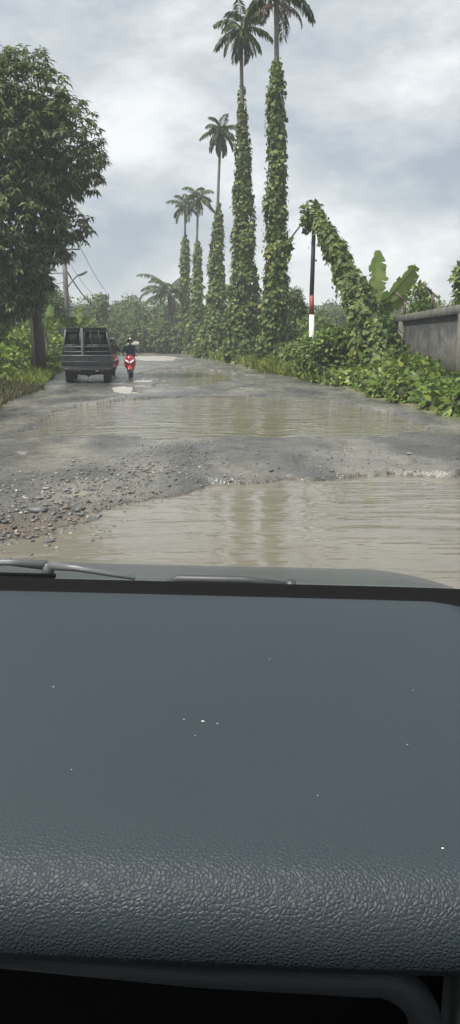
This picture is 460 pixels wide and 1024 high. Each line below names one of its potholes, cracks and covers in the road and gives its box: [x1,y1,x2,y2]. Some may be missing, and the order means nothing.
pothole [0,467,460,589]
pothole [106,384,146,394]
pothole [18,395,434,441]
